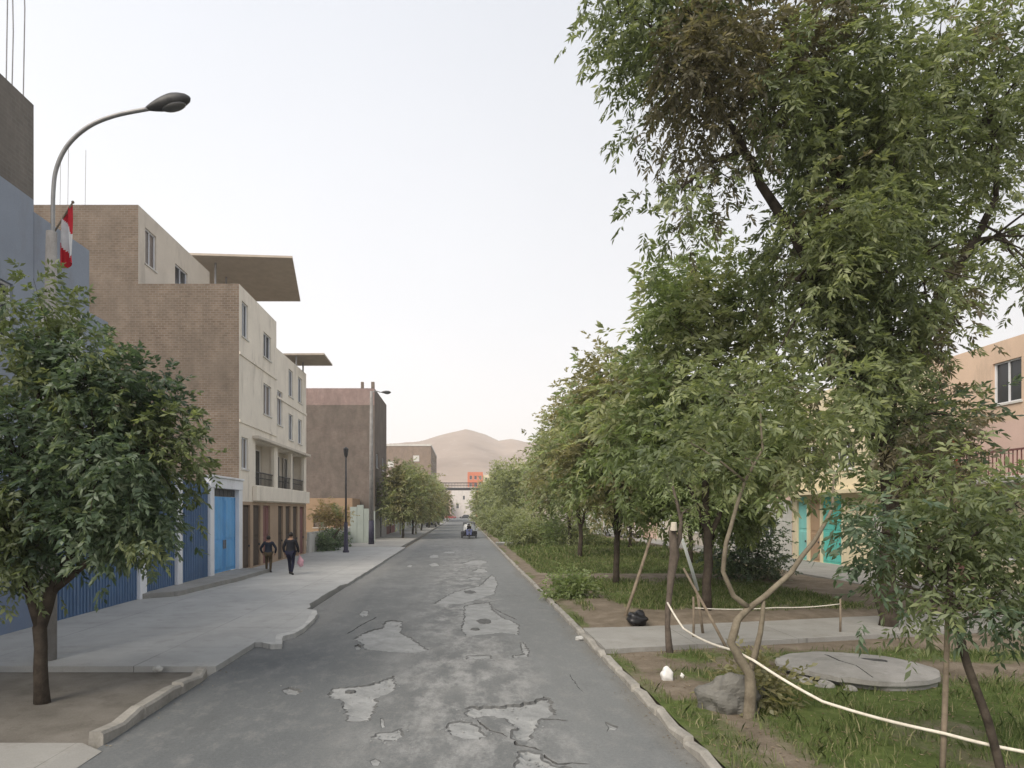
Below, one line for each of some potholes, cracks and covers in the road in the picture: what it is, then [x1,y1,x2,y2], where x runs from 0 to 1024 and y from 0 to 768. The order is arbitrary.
pothole [353,619,432,653]
pothole [370,724,416,744]
pothole [327,676,400,722]
pothole [456,696,556,741]
pothole [513,750,572,768]
pothole [512,642,531,658]
pothole [433,575,501,604]
pothole [457,602,523,636]
